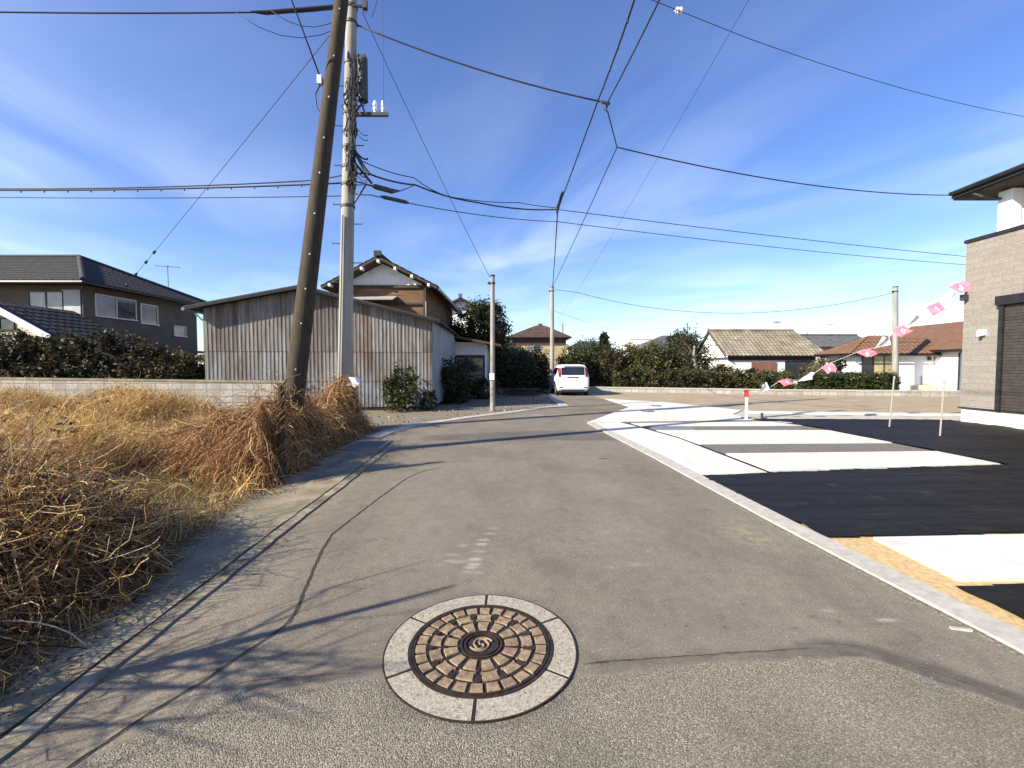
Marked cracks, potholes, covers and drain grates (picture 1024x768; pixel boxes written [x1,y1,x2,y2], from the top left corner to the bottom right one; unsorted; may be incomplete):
manhole cover [382,595,577,724]
drain grate [341,440,393,449]
